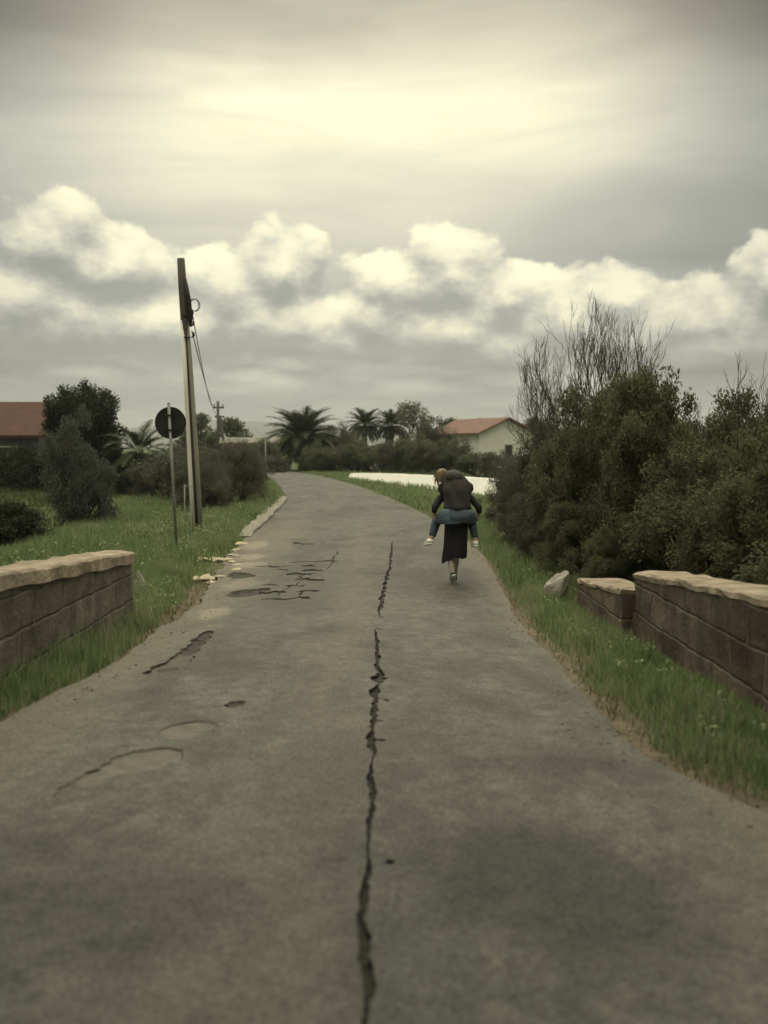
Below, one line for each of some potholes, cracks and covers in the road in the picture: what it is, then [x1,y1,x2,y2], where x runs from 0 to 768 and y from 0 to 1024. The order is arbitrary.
pothole [156,720,220,741]
pothole [51,747,184,798]
pothole [224,700,246,708]
crack [255,550,339,600]
pothole [141,630,214,675]
